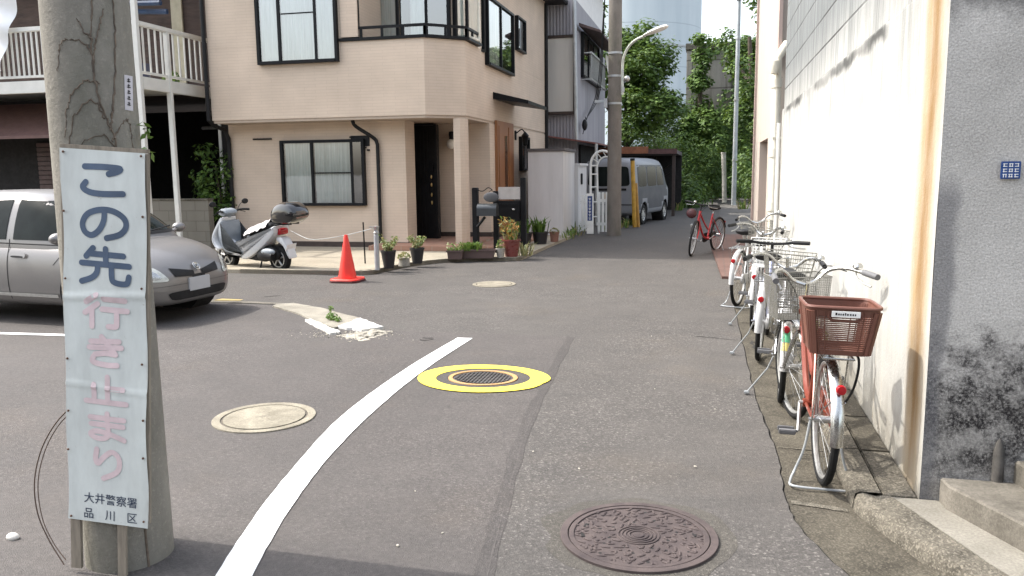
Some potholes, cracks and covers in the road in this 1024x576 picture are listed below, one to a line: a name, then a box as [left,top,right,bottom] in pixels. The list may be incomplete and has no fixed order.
manhole cover [418,365,551,392]
manhole cover [560,502,719,575]
manhole cover [211,402,316,434]
